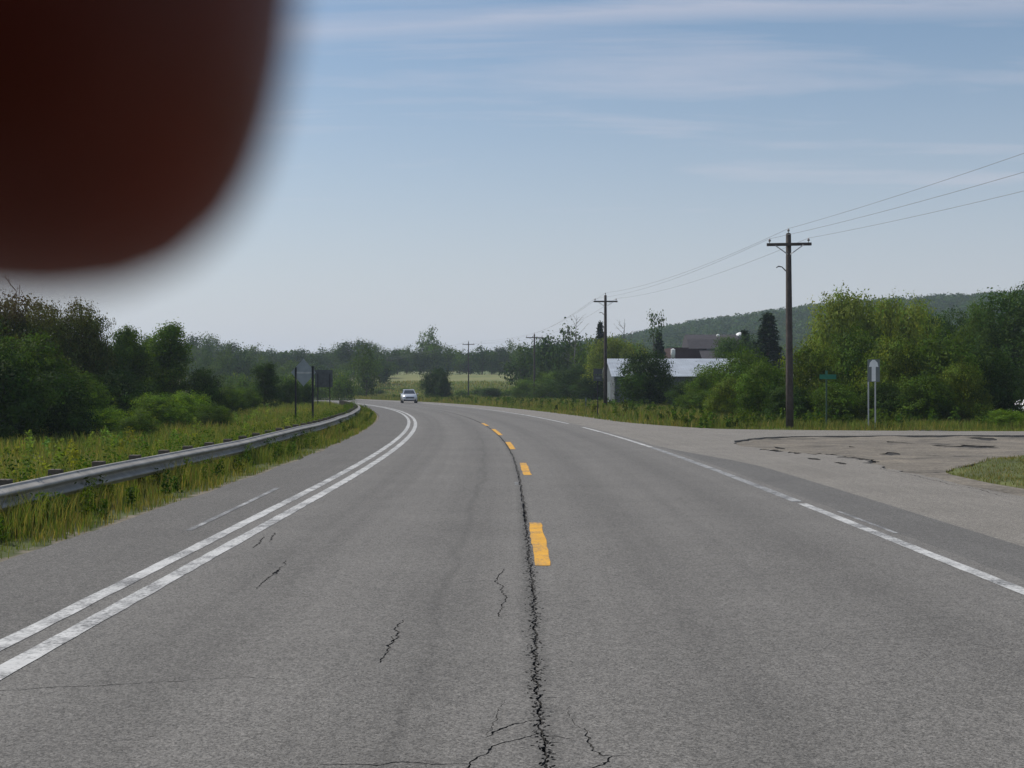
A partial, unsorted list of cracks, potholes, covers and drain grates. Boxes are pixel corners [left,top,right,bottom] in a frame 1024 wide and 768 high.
crack [253,533,286,589]
crack [319,410,624,768]
